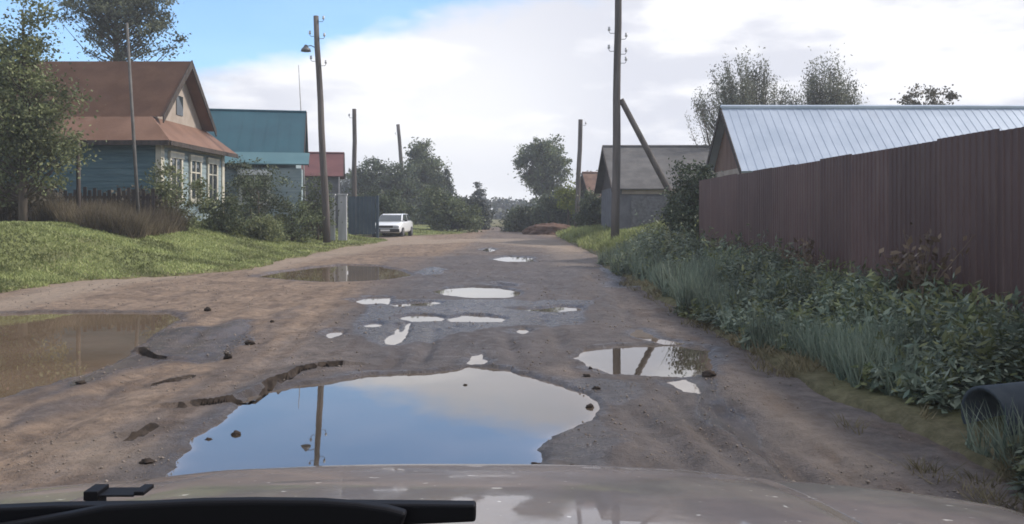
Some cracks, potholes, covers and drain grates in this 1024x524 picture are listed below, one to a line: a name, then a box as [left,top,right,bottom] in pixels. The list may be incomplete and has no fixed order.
pothole [569,342,722,377]
pothole [376,320,417,345]
pothole [346,295,396,304]
pothole [390,312,447,322]
pothole [318,327,350,338]
pothole [456,350,497,367]
pothole [425,285,526,298]
pothole [253,264,418,282]
pothole [151,363,609,478]
pothole [653,376,713,394]
pothole [444,312,511,322]
pothole [0,310,186,399]
